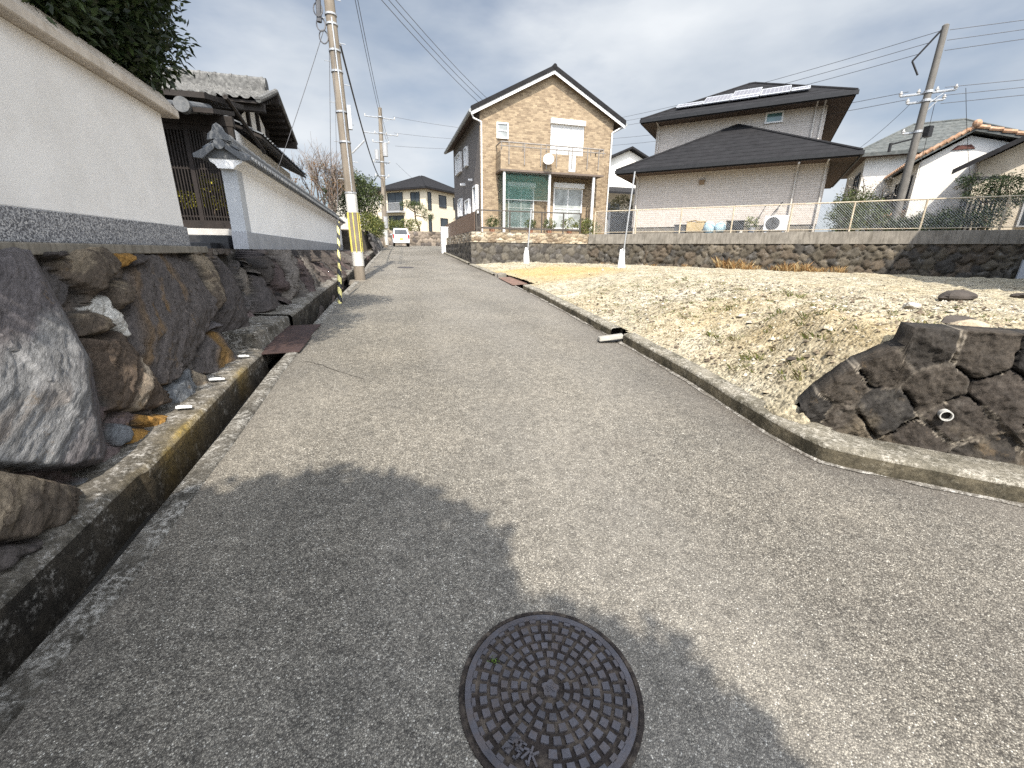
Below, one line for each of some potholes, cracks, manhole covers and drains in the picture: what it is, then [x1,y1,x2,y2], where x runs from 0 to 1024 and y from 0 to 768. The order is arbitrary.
manhole cover [459,611,644,768]
